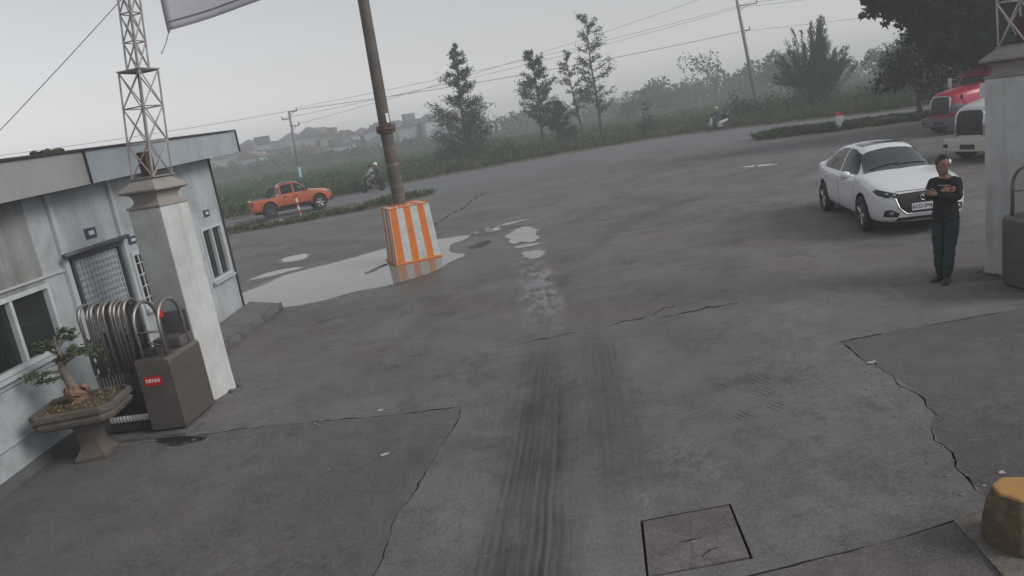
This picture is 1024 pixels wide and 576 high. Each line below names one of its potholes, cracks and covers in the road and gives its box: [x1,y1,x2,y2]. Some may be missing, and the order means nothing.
crack [837,308,1023,496]
pothole [468,240,491,249]
crack [143,406,461,576]
pothole [153,436,208,447]
manhole cover [640,504,753,576]
crack [512,302,740,346]
